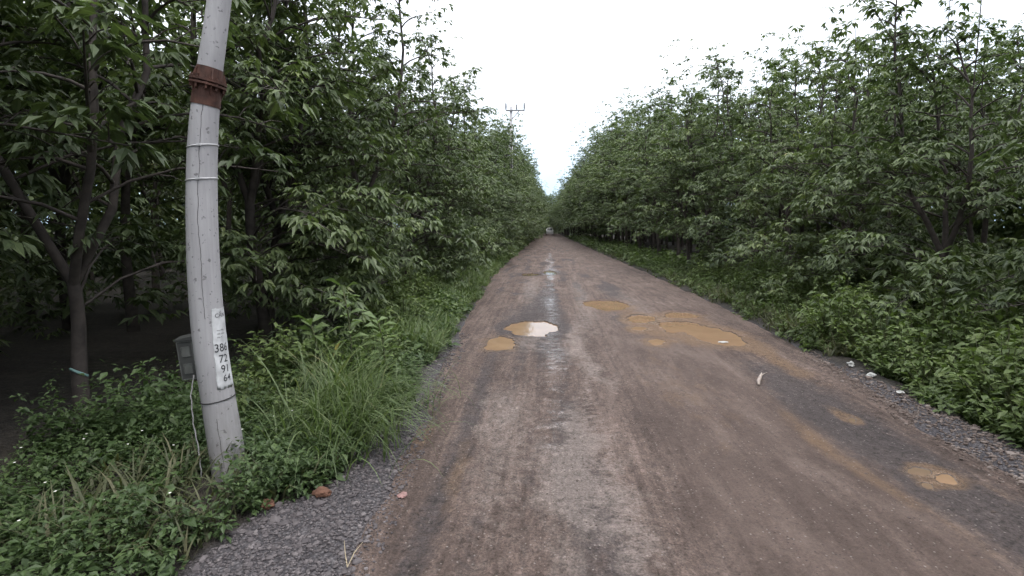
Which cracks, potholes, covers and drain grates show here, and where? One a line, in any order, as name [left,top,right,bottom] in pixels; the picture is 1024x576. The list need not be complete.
pothole [907,466,932,476]
pothole [657,321,749,346]
pothole [503,320,560,337]
pothole [626,314,656,323]
pothole [935,473,958,485]
pothole [582,300,630,311]
pothole [484,336,517,351]
